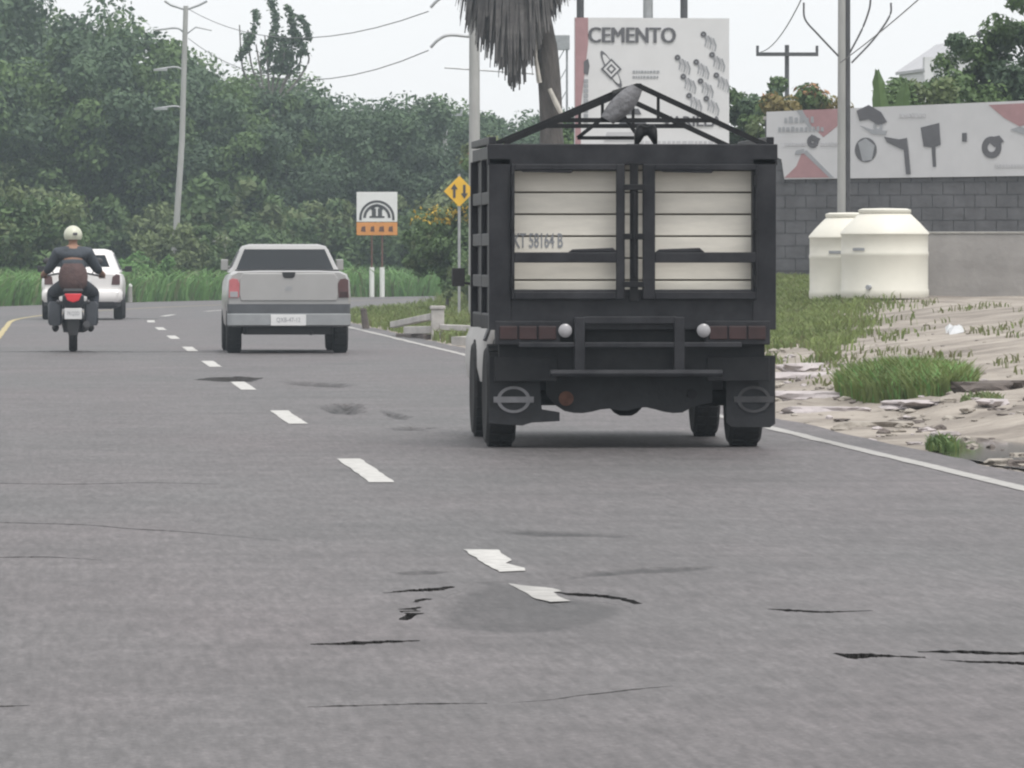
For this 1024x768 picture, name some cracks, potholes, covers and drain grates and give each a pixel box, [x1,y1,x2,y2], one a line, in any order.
pothole [428,582,635,634]
crack [386,586,455,620]
pothole [379,410,414,420]
crack [555,592,642,605]
pothole [316,403,370,415]
crack [0,522,279,541]
